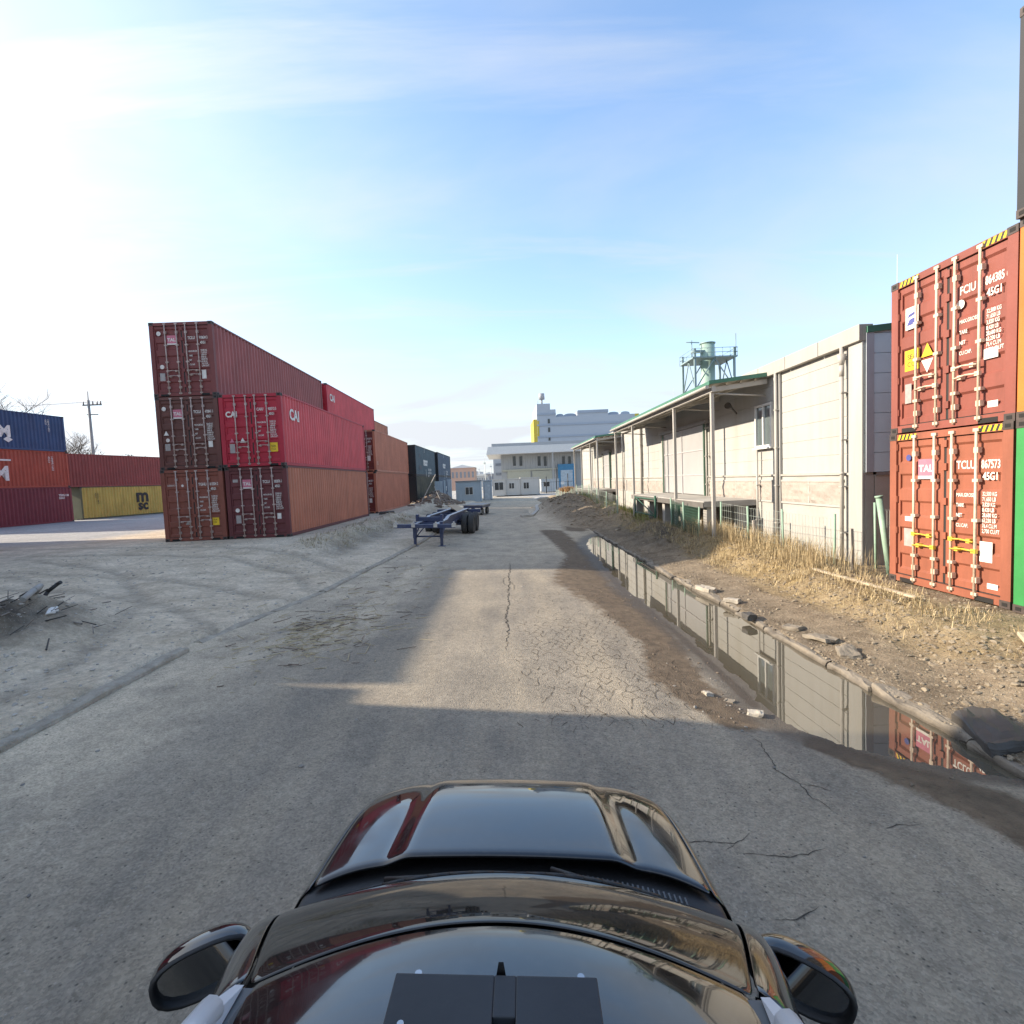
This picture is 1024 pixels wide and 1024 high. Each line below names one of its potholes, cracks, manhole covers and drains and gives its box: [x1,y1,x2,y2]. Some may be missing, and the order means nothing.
crack [693,837,825,857]
crack [514,593,726,733]
crack [775,907,818,920]
crack [750,735,834,812]
crack [503,567,515,649]
